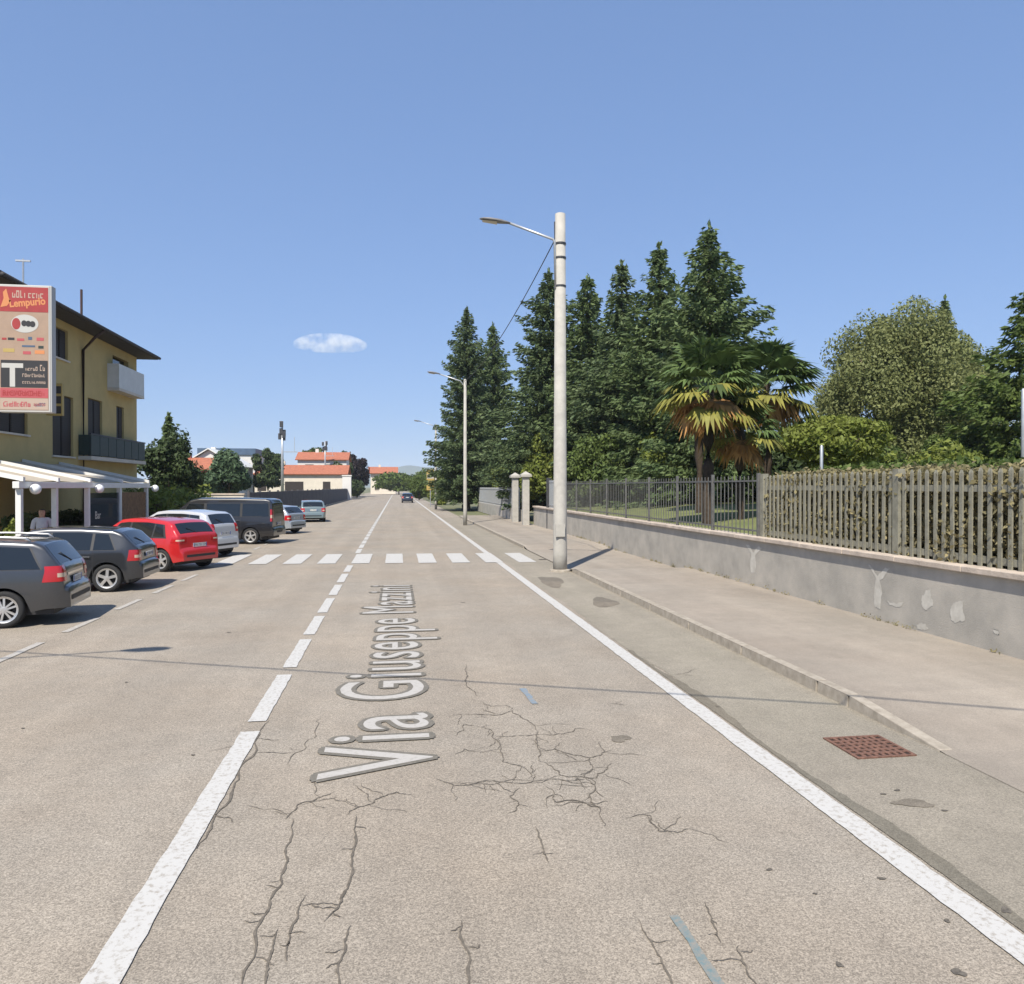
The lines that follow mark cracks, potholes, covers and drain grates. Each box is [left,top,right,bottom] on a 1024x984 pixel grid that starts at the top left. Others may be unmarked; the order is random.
crack [451,920,480,984]
crack [639,920,673,984]
crack [241,782,407,984]
crack [704,902,757,984]
crack [626,799,726,842]
crack [438,665,639,826]
drain grate [823,735,917,759]
